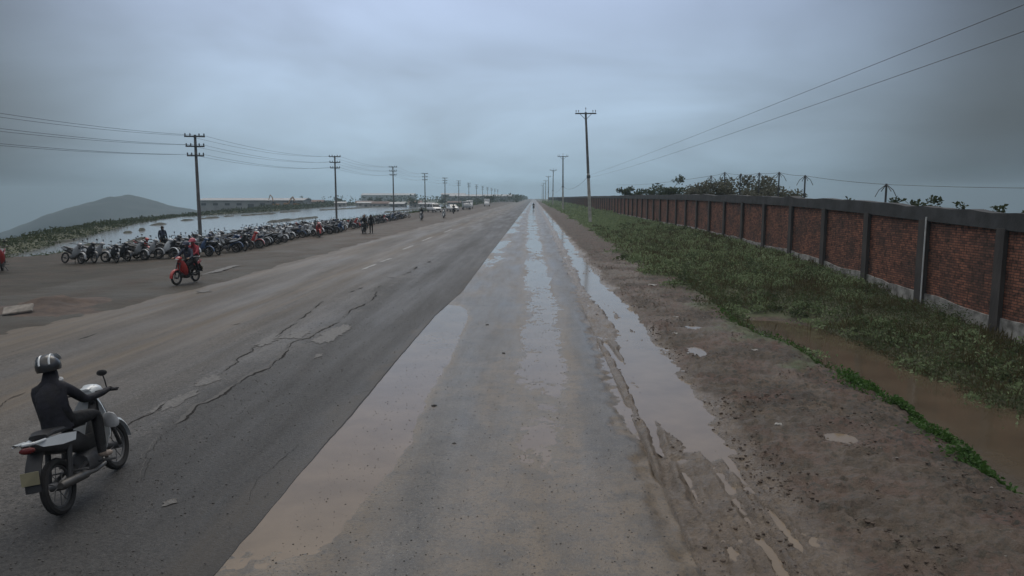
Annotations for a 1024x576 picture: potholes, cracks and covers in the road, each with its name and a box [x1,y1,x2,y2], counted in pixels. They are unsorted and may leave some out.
crack [128,261,430,480]
